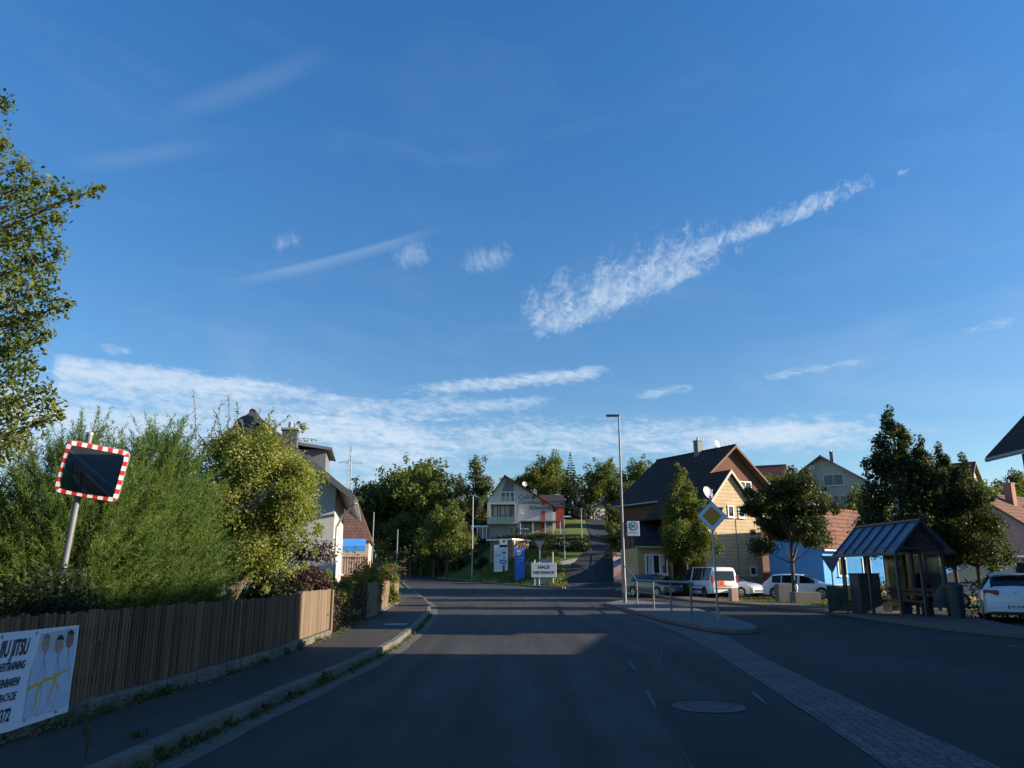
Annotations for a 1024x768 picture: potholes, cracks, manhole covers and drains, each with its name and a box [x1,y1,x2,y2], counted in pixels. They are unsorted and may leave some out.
manhole cover [672,701,746,713]
